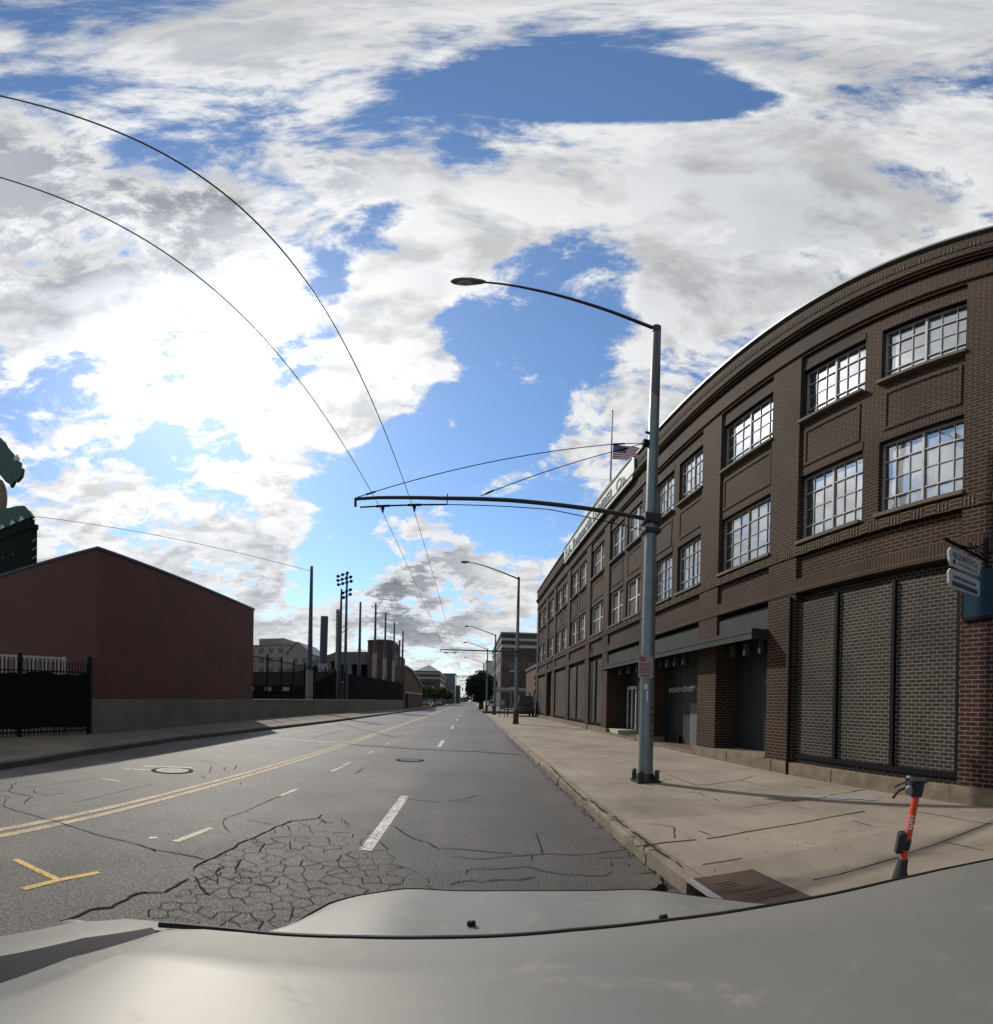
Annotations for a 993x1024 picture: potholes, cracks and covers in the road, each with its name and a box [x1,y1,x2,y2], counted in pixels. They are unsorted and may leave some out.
drain grate [686,869,811,904]
crack [4,783,632,930]
